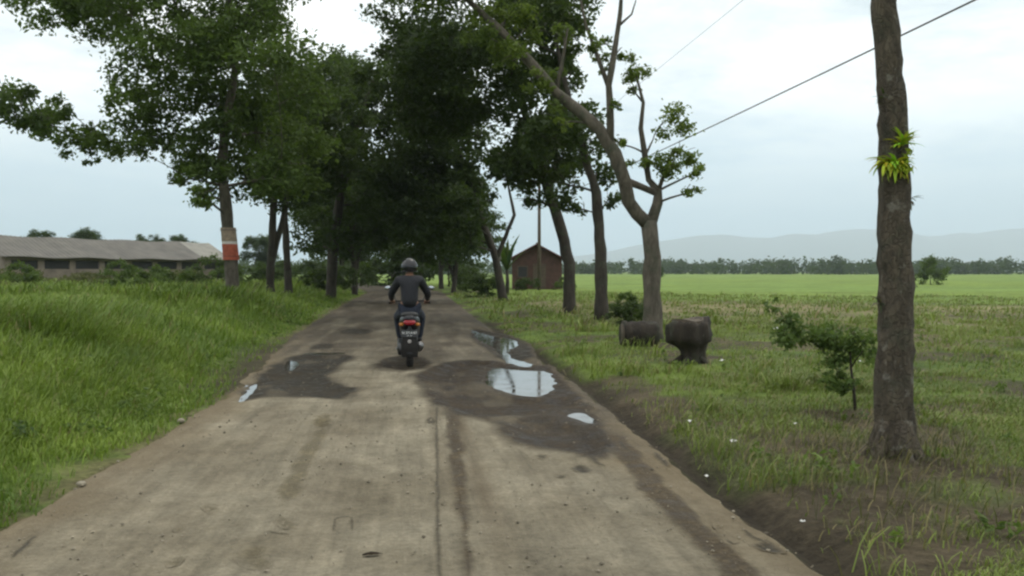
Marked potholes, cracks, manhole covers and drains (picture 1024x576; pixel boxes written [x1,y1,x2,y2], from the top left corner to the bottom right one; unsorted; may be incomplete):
pothole [239,354,361,402]
pothole [412,360,615,458]
pothole [470,328,537,367]
